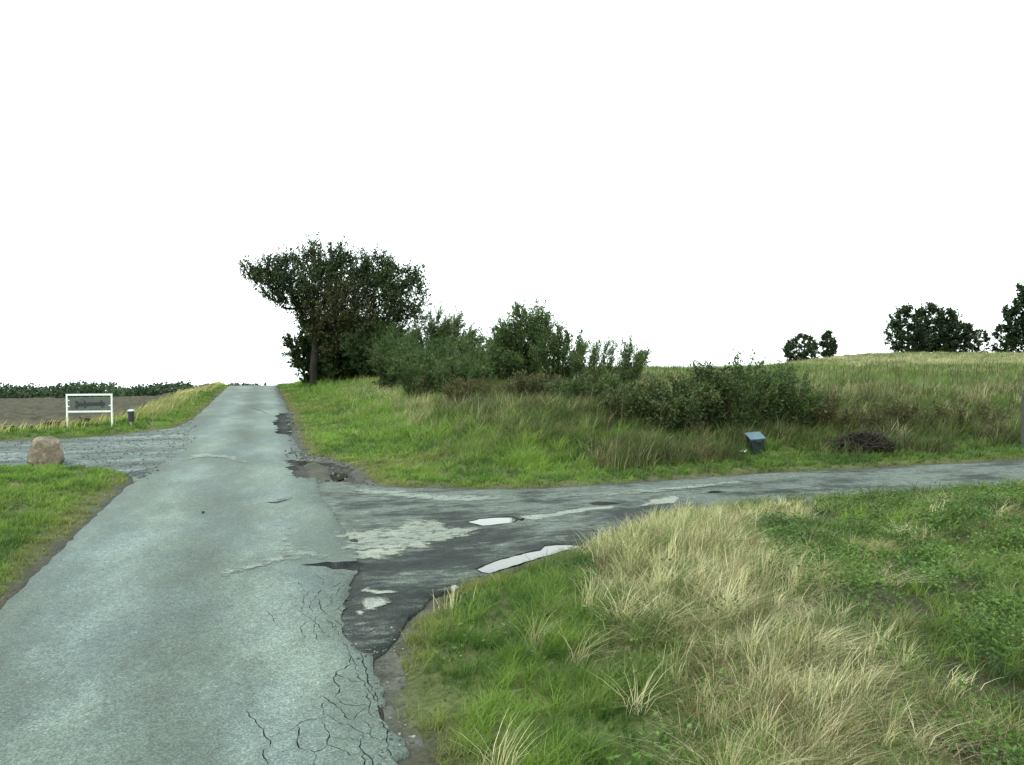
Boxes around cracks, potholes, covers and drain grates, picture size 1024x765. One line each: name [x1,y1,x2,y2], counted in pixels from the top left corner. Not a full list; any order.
crack [246,574,392,765]
pothole [285,460,368,484]
pothole [272,413,292,435]
pothole [475,543,581,574]
